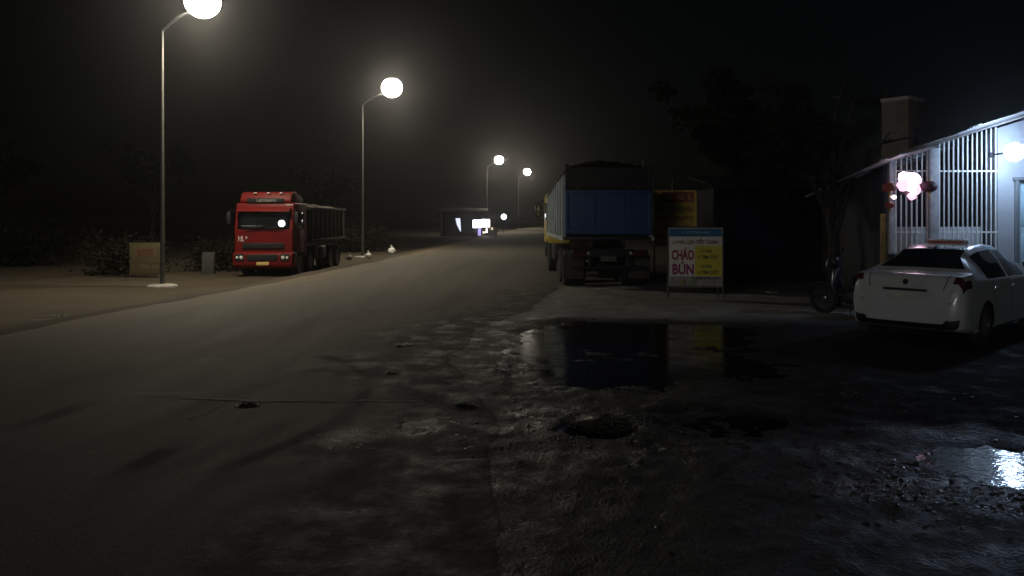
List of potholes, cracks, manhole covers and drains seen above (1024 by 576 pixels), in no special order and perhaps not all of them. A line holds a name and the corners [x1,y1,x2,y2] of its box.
pothole [529,416,661,445]
crack [151,396,433,420]
